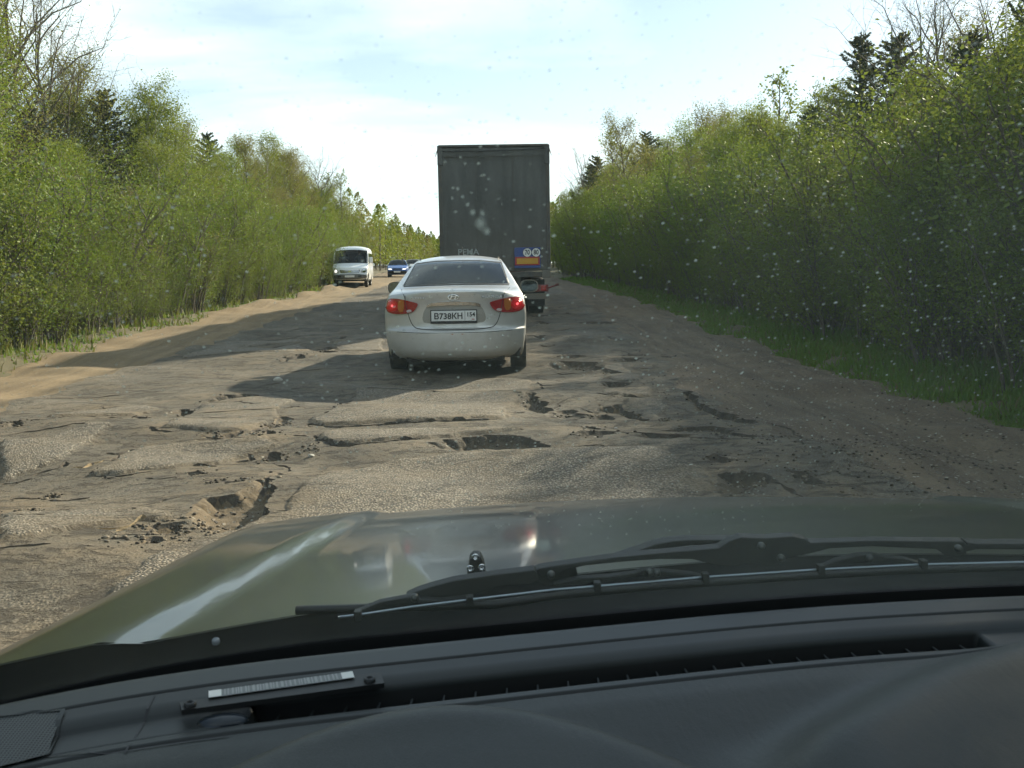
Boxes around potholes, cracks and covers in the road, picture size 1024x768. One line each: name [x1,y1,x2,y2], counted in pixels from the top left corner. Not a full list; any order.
pothole [544,361,605,372]
pothole [425,435,554,451]
pothole [595,402,650,421]
pothole [186,472,283,534]
pothole [519,392,554,414]
pothole [714,472,778,495]
pothole [679,391,762,424]
